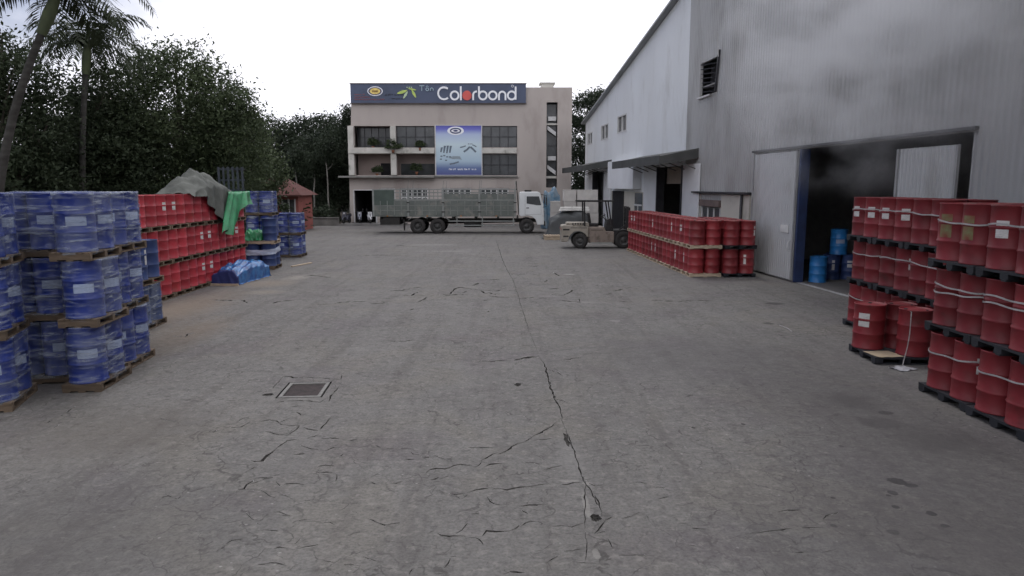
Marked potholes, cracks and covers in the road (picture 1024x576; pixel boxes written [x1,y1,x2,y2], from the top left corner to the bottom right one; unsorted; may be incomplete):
crack [746,509,838,553]
crack [161,376,400,566]
drain grate [276,382,332,398]
